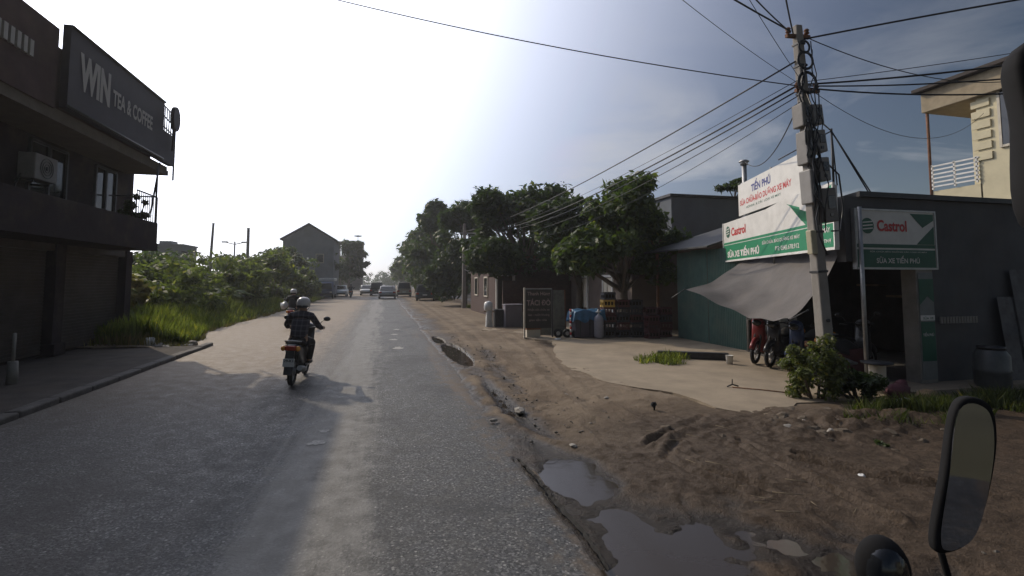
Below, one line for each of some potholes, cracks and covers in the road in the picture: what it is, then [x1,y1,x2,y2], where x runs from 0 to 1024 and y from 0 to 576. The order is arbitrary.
pothole [442,343,474,367]
